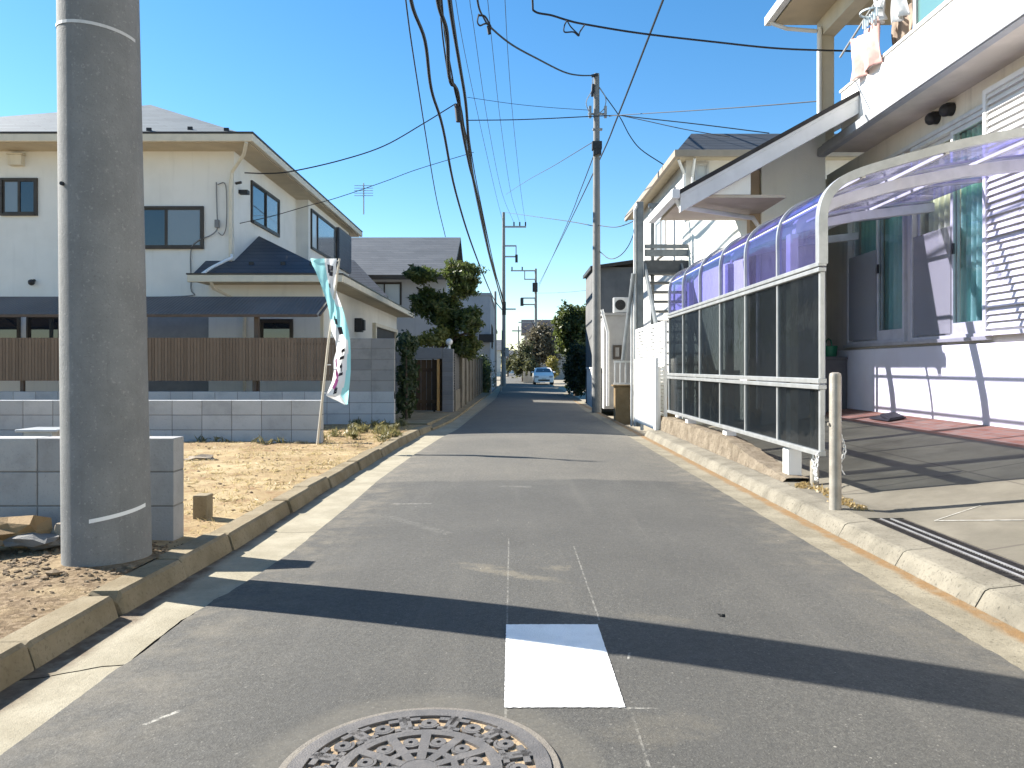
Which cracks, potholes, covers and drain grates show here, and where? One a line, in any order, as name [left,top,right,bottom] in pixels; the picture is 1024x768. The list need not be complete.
drain grate [870,518,1024,585]
manhole cover [279,707,561,768]
